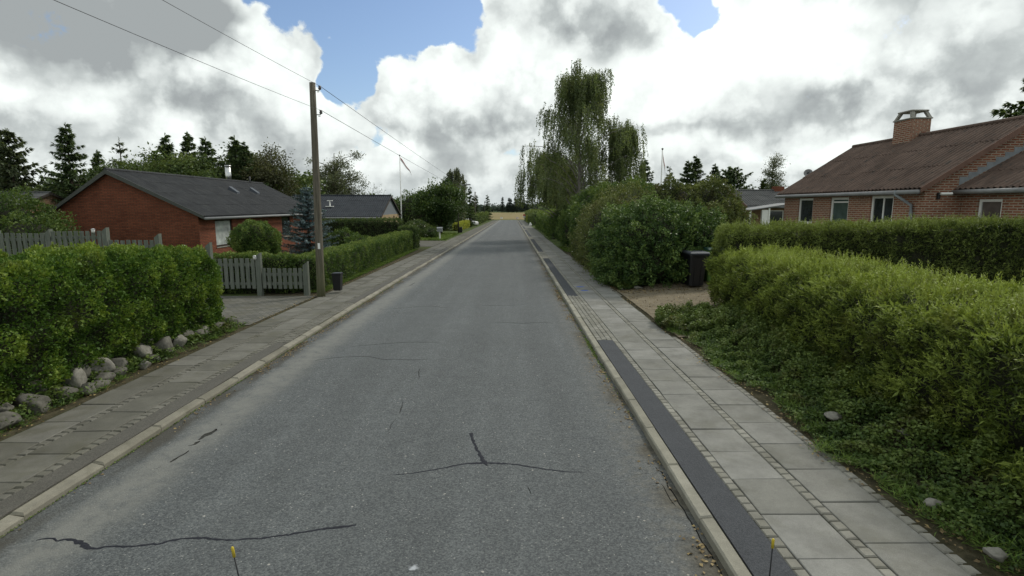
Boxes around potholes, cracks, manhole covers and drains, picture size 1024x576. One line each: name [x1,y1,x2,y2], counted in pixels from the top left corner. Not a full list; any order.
crack [315,342,421,430]
crack [156,424,222,469]
